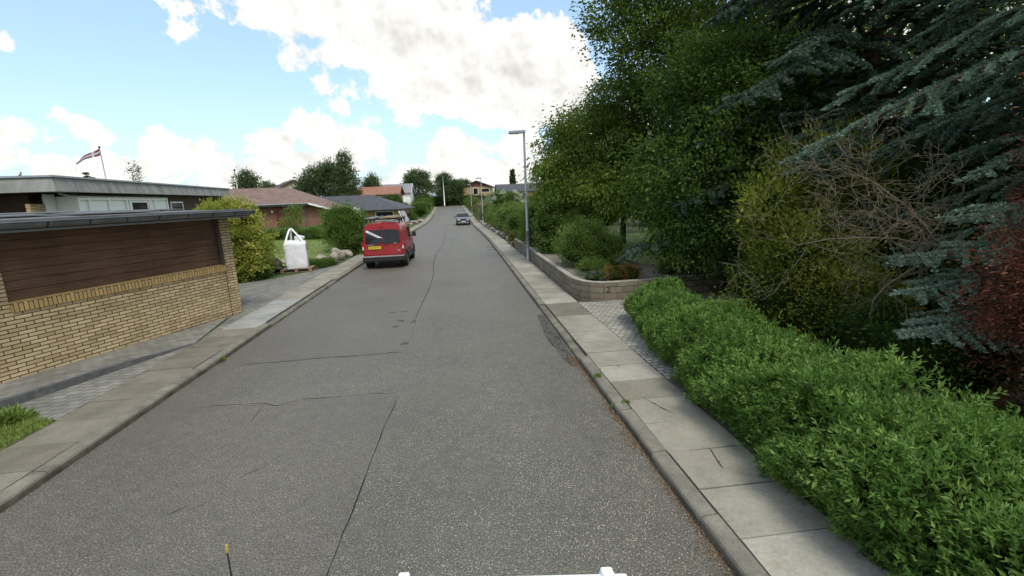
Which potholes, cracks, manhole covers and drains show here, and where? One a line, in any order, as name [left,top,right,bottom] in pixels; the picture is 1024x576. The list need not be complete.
crack [187,393,399,576]
crack [235,214,451,367]
